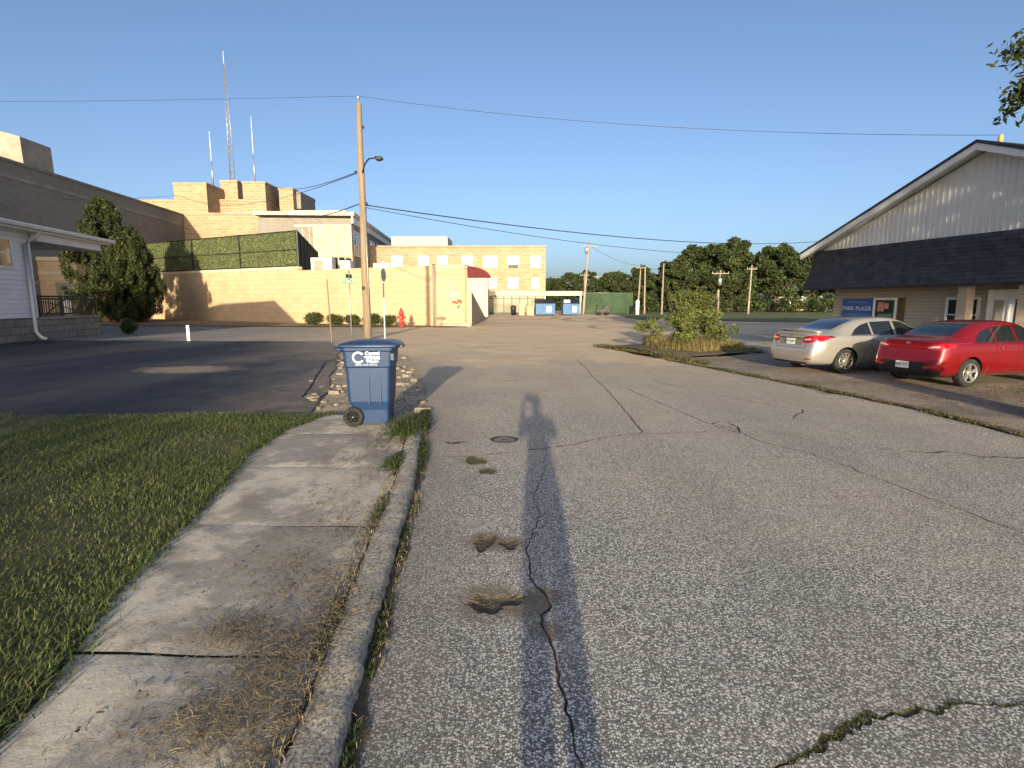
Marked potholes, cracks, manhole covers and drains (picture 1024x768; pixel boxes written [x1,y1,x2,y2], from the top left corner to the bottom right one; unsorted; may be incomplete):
crack [436,360,1024,768]
pothole [473,534,498,553]
pothole [464,593,526,615]
pothole [497,539,518,550]
pothole [466,456,487,465]
